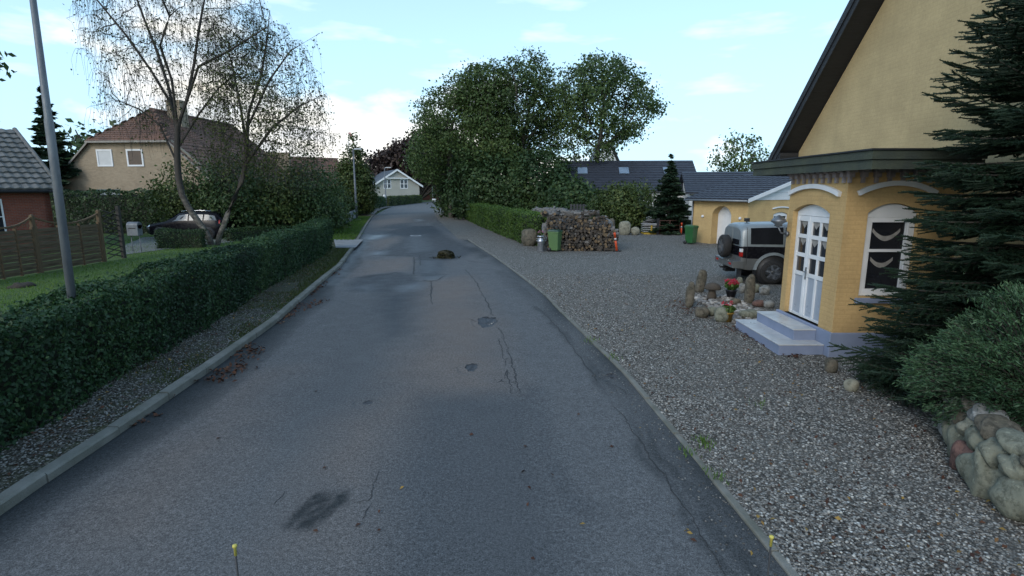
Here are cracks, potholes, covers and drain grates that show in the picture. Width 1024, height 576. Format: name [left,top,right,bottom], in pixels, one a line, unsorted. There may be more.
crack [498,328,520,394]
crack [620,412,725,575]
pothole [458,361,485,374]
pothole [472,315,503,329]
